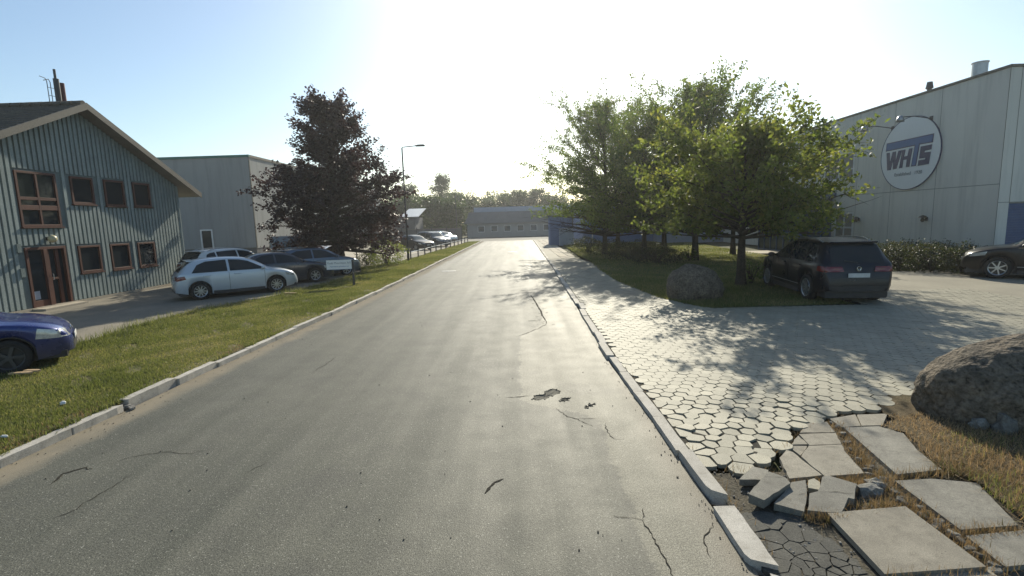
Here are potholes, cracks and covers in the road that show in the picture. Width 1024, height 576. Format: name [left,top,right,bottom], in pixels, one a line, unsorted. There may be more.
crack [614,509,673,576]
crack [53,450,204,519]
pothole [531,389,561,401]
